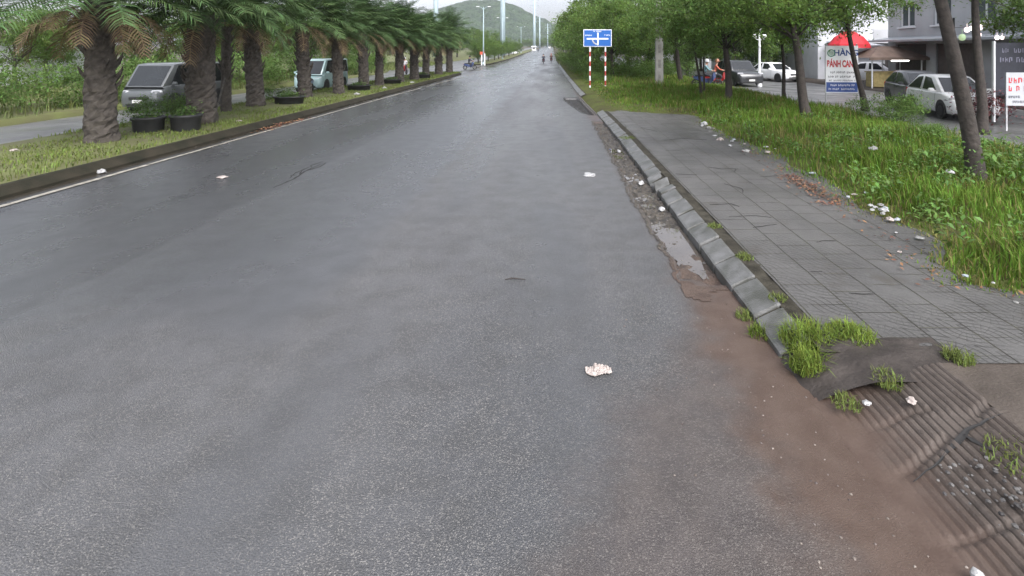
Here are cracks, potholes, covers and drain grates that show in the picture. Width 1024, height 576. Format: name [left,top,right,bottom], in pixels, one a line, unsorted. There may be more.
crack [913,413,1003,482]
crack [273,161,325,188]
